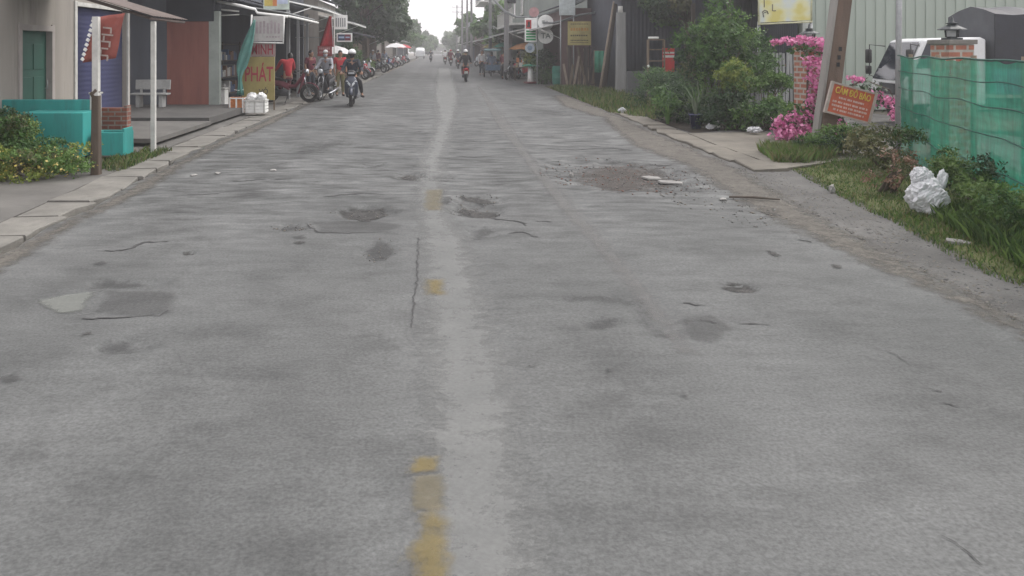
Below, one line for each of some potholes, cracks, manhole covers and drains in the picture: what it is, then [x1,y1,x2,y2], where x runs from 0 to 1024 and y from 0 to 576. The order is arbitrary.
pothole [580,167,666,192]
crack [96,241,167,251]
pothole [341,209,386,221]
pothole [724,283,755,293]
pothole [462,196,494,204]
pothole [458,208,498,218]
